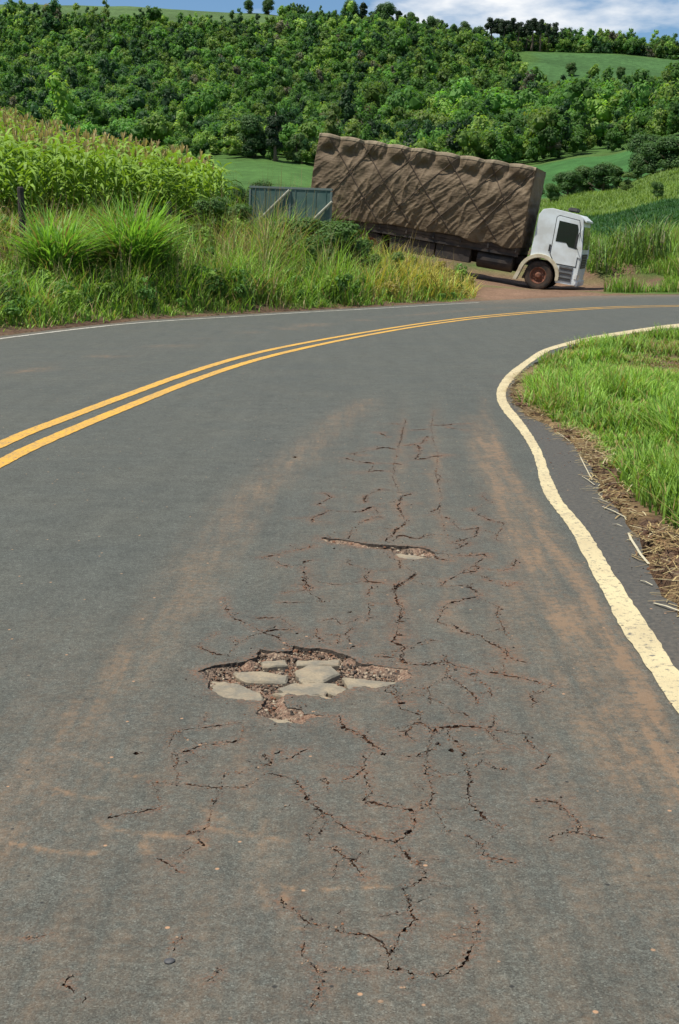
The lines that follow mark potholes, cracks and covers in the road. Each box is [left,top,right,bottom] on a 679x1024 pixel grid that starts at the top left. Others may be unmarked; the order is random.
pothole [322,537,436,561]
crack [111,715,253,872]
crack [226,418,551,1007]
pothole [198,646,413,724]
crack [537,800,603,839]
